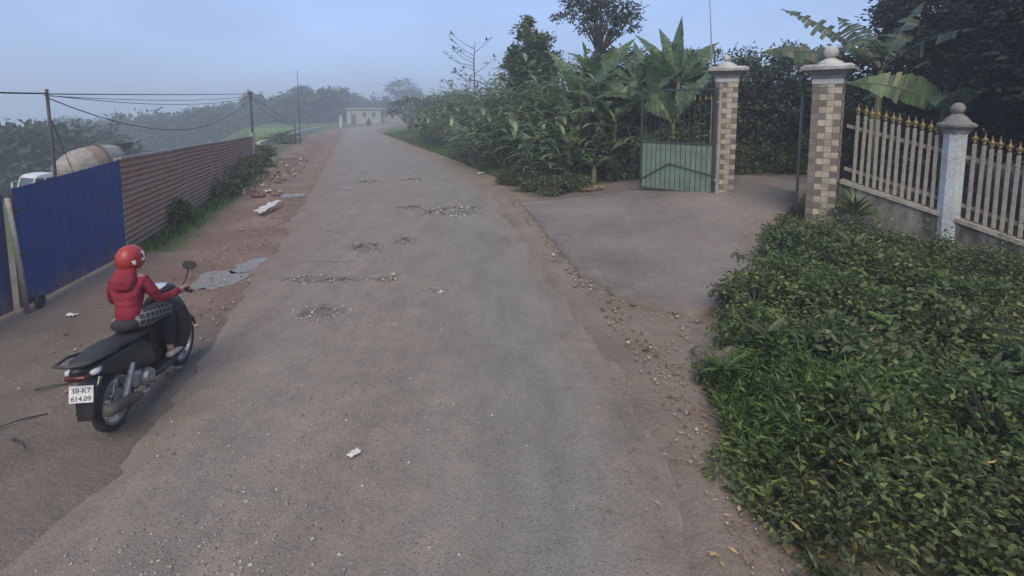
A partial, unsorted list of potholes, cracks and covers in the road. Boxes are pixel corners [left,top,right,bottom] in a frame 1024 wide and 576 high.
pothole [418,203,482,218]
pothole [278,274,361,285]
pothole [364,272,399,281]
pothole [290,303,353,321]
pothole [347,240,384,254]
